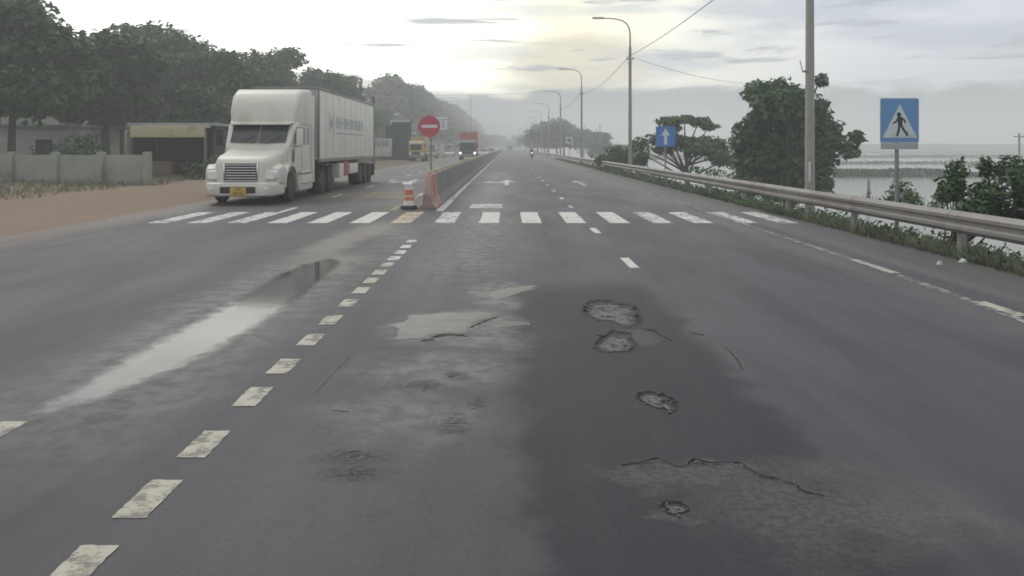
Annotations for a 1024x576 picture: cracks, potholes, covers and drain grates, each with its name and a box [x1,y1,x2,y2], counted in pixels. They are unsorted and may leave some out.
pothole [592,330,638,353]
crack [622,457,825,496]
pothole [581,299,643,328]
pothole [659,499,690,517]
crack [726,347,743,371]
pothole [635,390,678,414]
